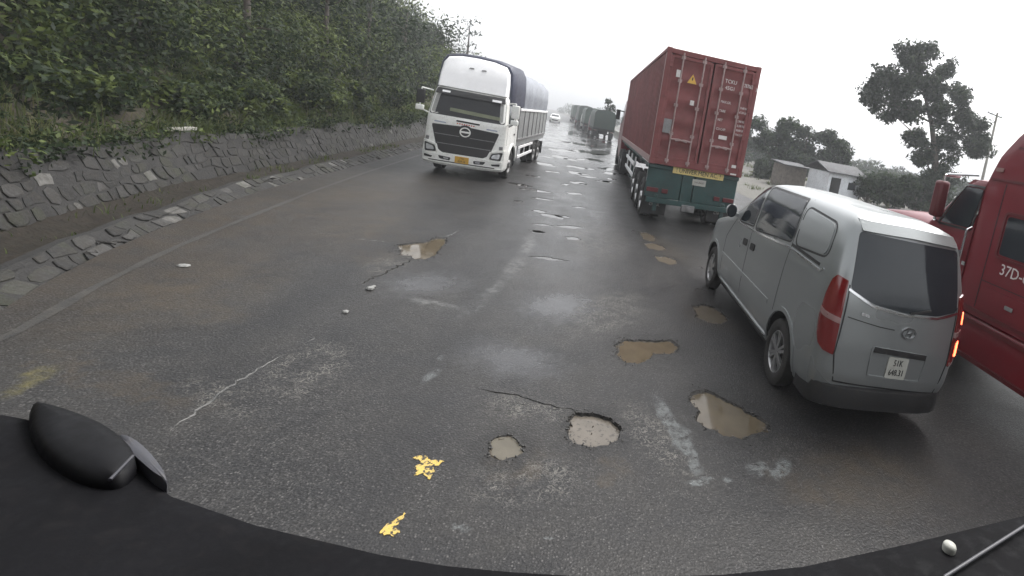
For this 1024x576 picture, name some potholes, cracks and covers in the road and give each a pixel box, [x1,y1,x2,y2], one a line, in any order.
pothole [654,256,679,265]
crack [473,387,617,414]
pothole [644,243,667,251]
crack [156,335,318,439]
pothole [564,408,625,449]
pothole [389,235,451,261]
pothole [483,433,526,463]
pothole [687,382,782,447]
pothole [611,336,683,366]
crack [358,231,458,285]
pothole [691,304,729,325]
